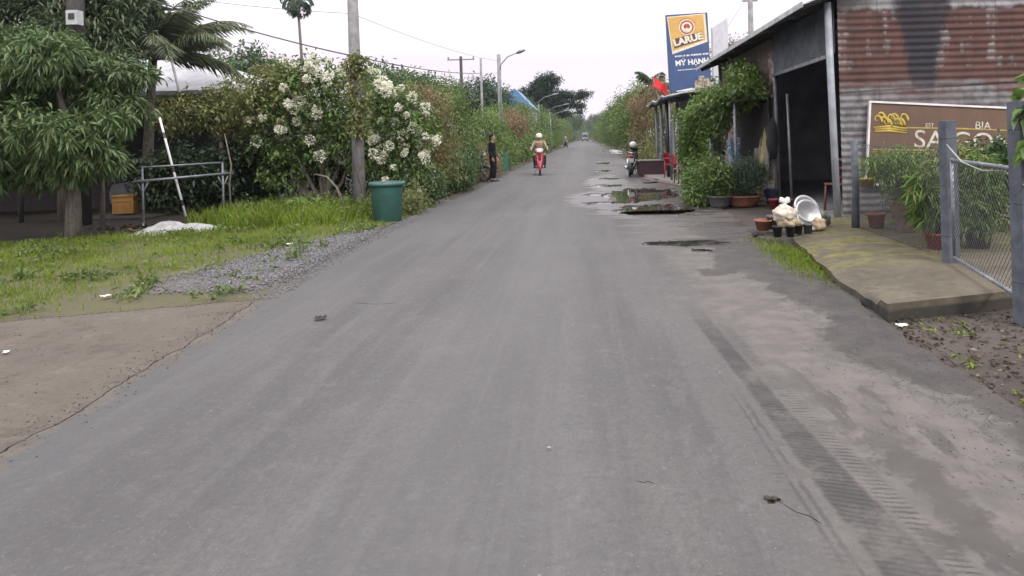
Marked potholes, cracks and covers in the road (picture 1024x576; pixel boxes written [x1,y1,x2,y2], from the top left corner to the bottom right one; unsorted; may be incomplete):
pothole [612,204,699,218]
pothole [601,188,680,204]
